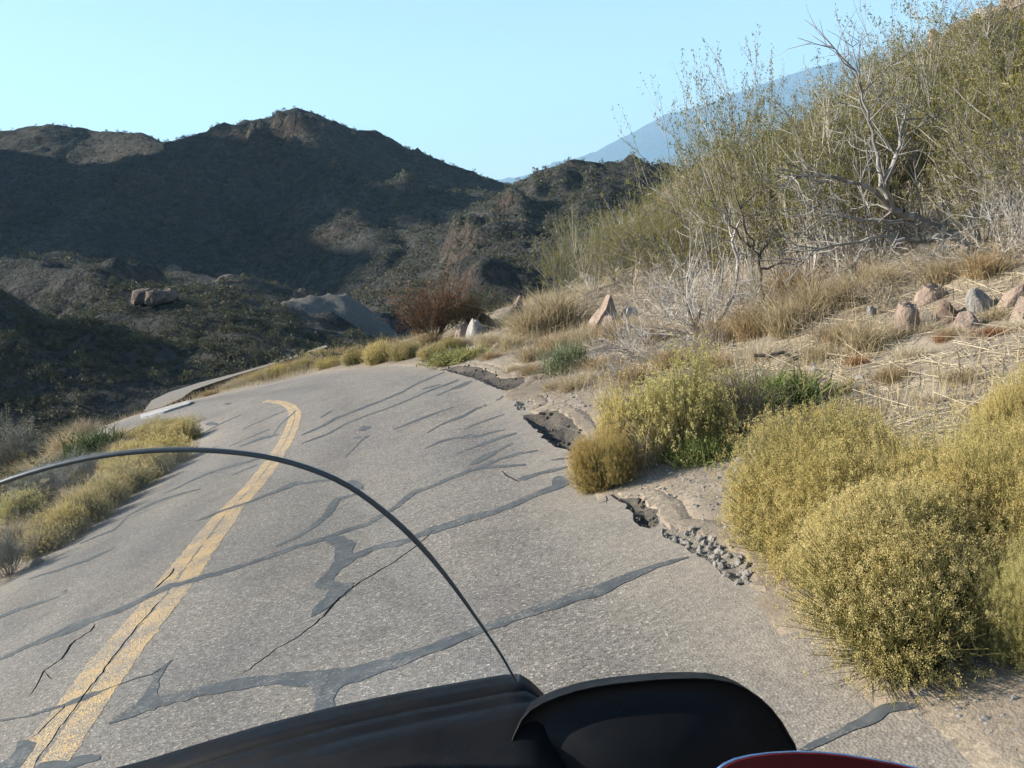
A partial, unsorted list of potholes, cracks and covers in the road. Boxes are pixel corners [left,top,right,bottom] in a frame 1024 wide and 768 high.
pothole [523,406,600,451]
crack [27,624,95,740]
pothole [441,363,538,392]
pothole [648,518,786,593]
pothole [617,489,691,534]
crack [243,532,432,673]
